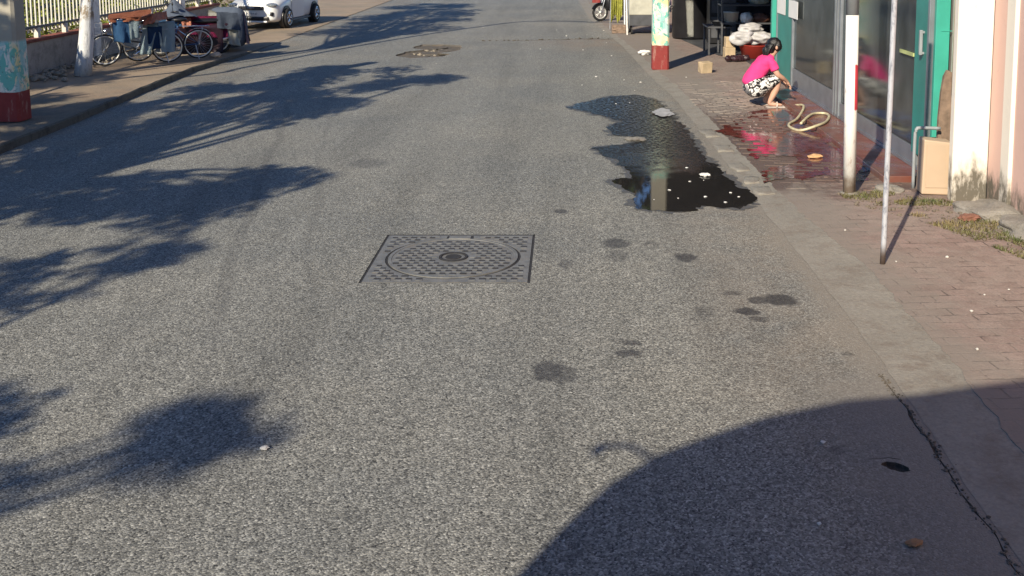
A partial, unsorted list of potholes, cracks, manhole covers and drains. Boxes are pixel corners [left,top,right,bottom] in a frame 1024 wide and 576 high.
pothole [881,461,910,472]
manhole cover [359,235,535,283]
